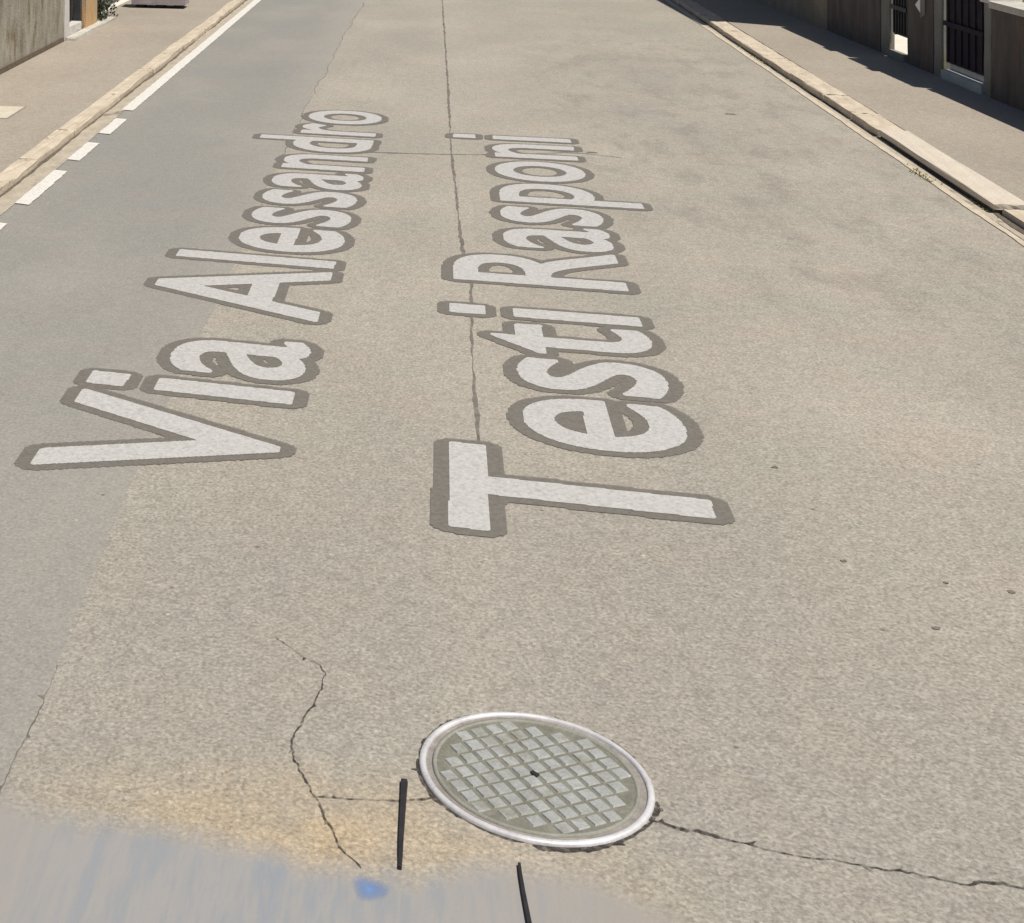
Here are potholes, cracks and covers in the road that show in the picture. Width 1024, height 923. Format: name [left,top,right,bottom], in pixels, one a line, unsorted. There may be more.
crack [276,637,1024,889]
crack [0,665,58,792]
manhole cover [419,711,655,848]
crack [377,0,621,441]
